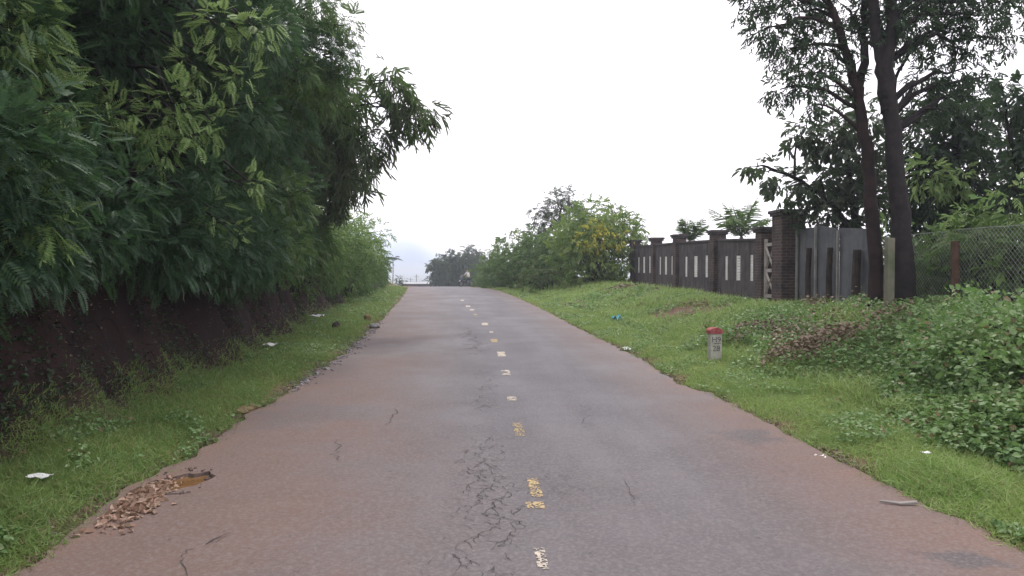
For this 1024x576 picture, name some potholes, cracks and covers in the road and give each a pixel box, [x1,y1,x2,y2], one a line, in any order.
crack [421,437,544,576]
pothole [129,467,216,494]
